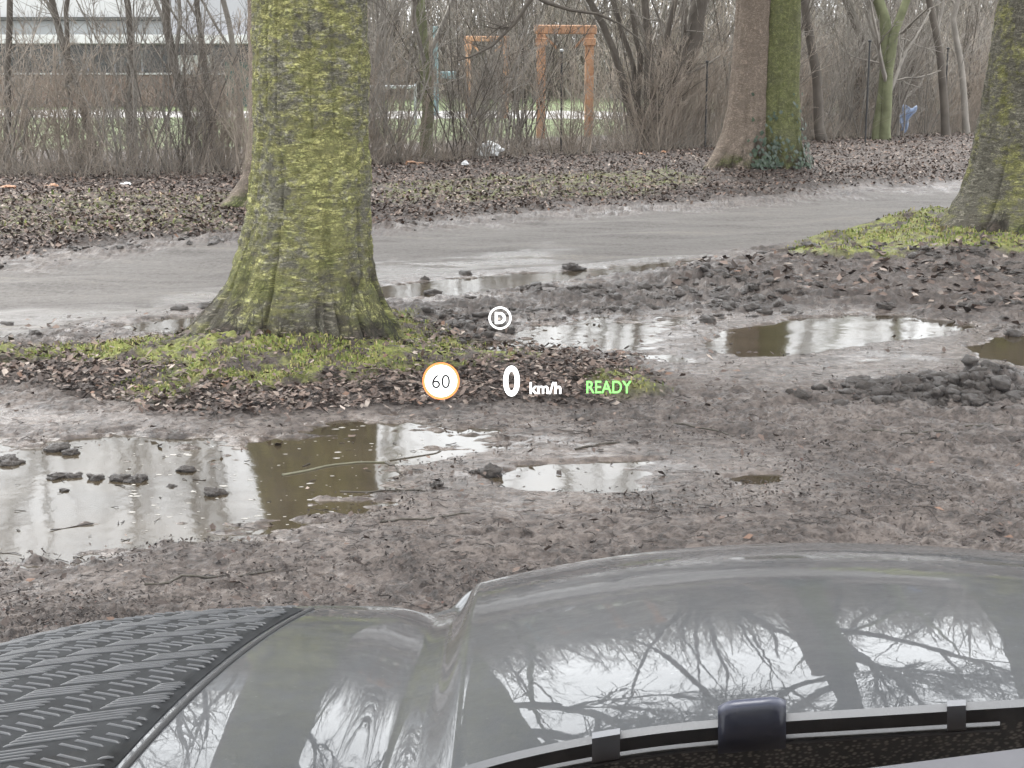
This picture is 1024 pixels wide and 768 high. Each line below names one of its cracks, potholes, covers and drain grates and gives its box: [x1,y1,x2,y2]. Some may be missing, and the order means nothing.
pothole [0,402,592,592]
pothole [402,304,954,381]
pothole [411,439,743,514]
pothole [657,299,1024,365]
